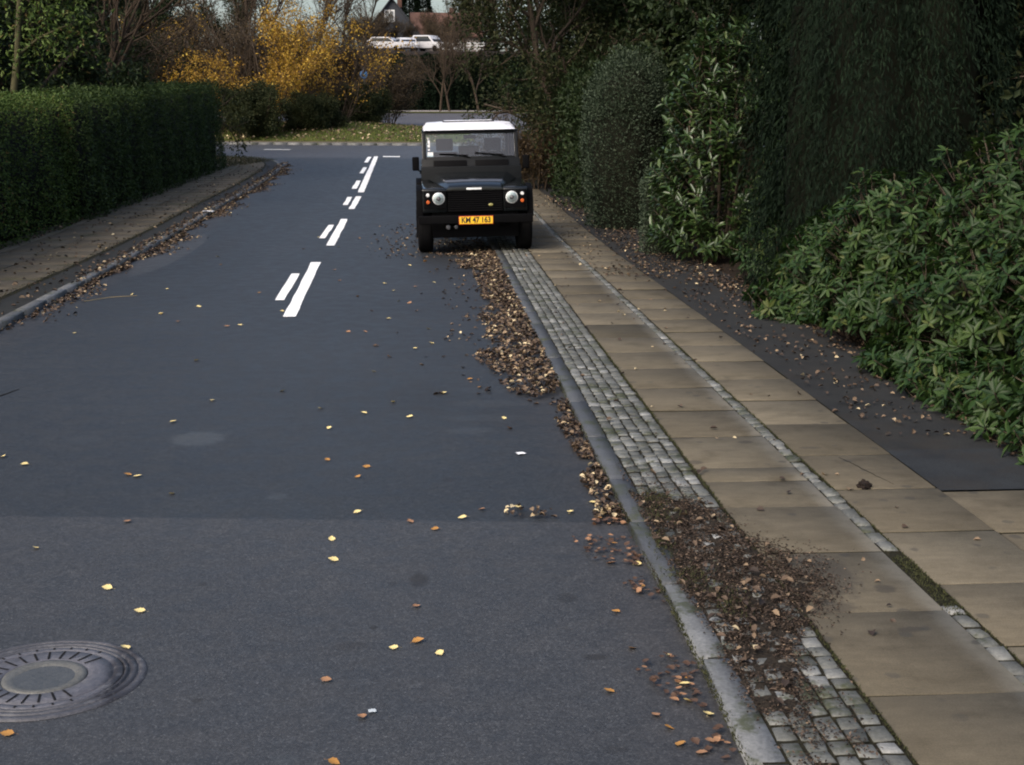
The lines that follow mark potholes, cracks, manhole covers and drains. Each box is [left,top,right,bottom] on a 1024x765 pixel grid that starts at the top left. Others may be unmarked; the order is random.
manhole cover [0,640,148,722]
